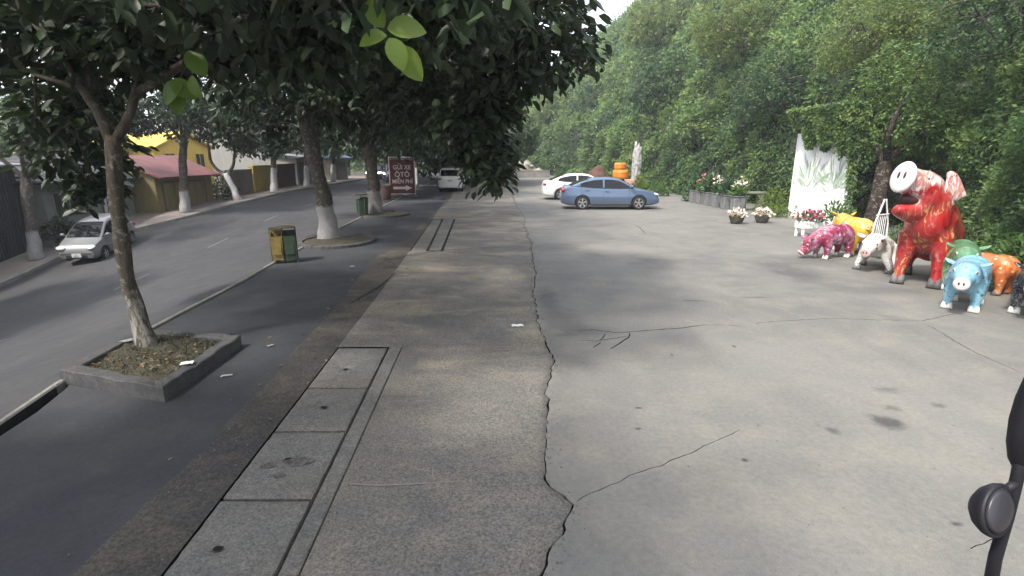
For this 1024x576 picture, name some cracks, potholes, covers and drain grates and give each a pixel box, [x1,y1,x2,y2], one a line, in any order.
crack [513,196,735,576]
